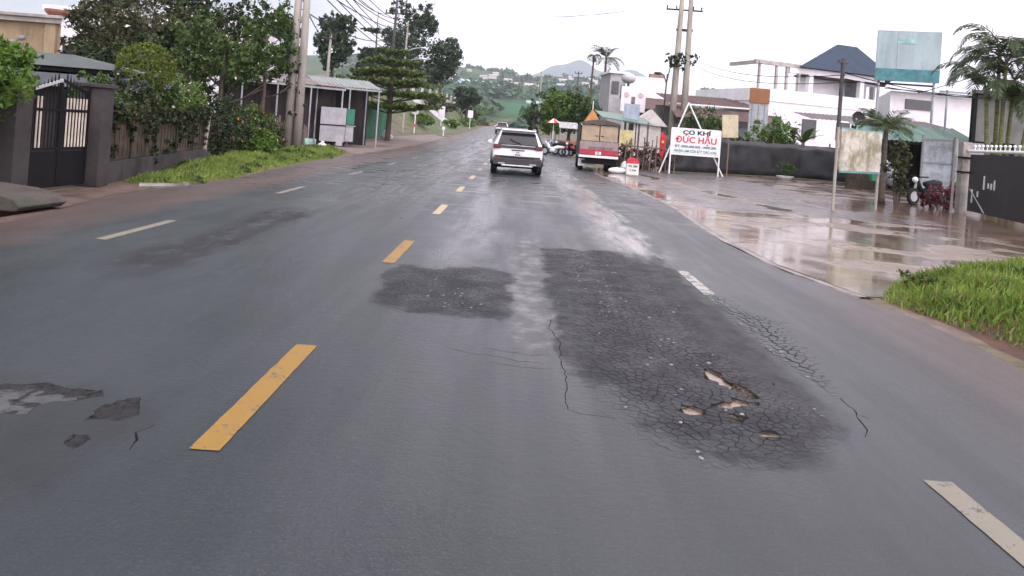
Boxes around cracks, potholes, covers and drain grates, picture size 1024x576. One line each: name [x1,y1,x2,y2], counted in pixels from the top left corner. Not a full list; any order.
pothole [714,399,756,409]
pothole [84,397,141,421]
crack [129,425,155,450]
pothole [703,369,760,399]
pothole [0,382,104,414]
crack [449,247,868,473]
pothole [63,434,91,450]
pothole [681,406,703,415]
